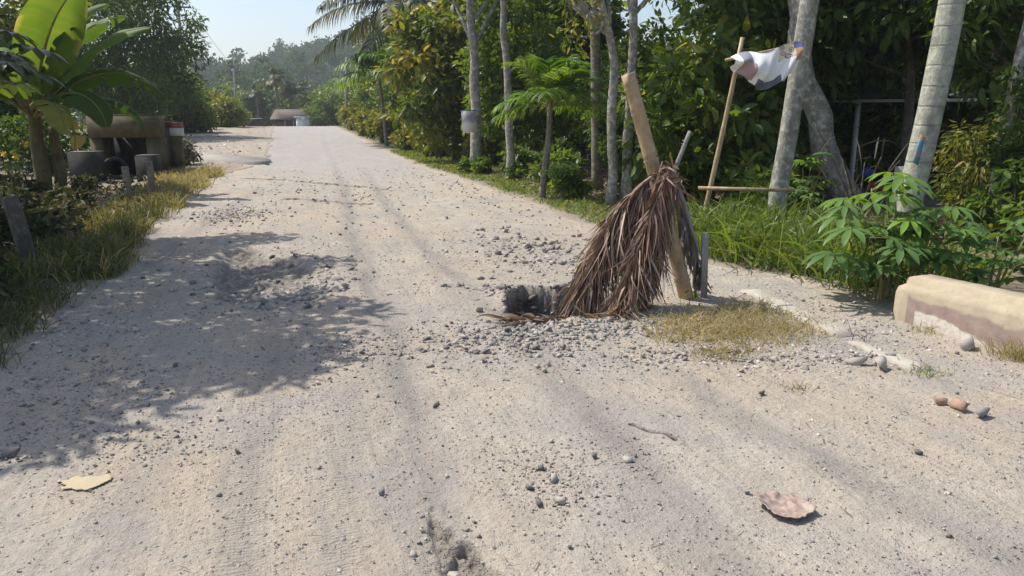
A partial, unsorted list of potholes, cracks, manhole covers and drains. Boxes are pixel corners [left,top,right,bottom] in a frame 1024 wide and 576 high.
pothole [491,283,661,324]
pothole [397,501,526,576]
